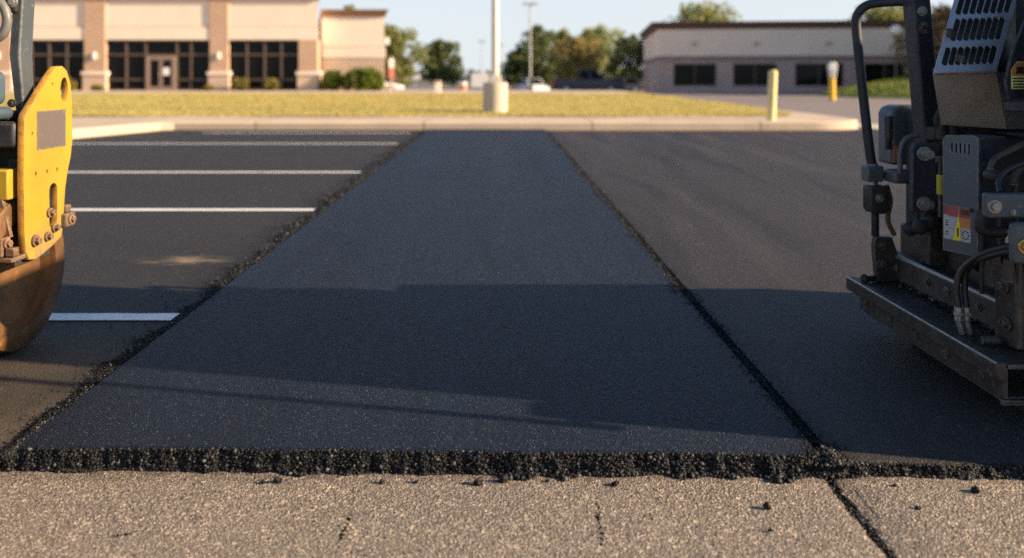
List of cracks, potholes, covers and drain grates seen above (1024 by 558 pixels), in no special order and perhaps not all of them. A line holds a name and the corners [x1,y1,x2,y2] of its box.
crack [595,503,603,548]
crack [339,518,351,542]
